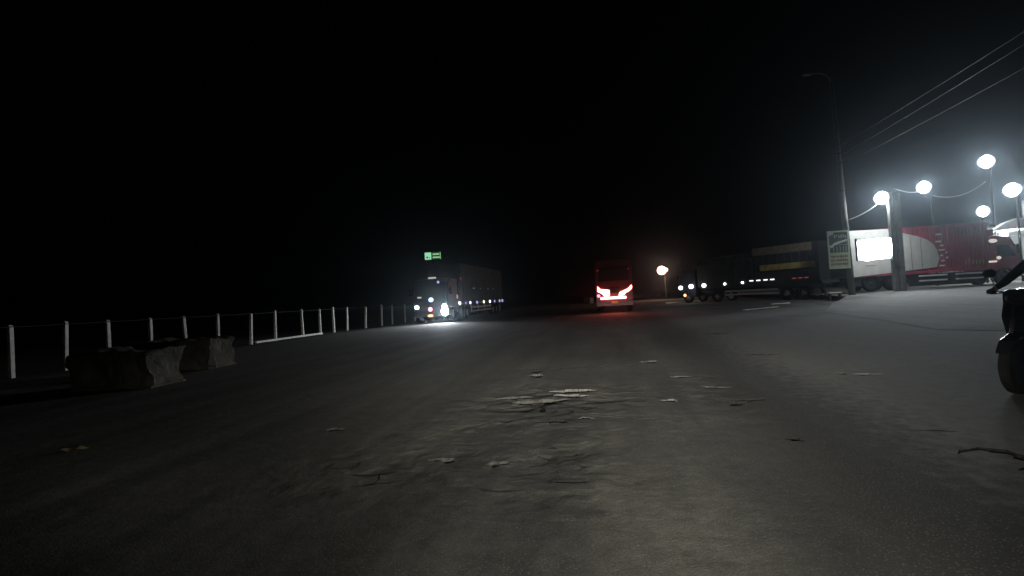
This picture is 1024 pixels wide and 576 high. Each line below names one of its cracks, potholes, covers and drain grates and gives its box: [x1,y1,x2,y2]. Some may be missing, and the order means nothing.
crack [537,446,589,483]
crack [348,472,414,487]
crack [483,399,633,423]
crack [915,430,1024,470]
